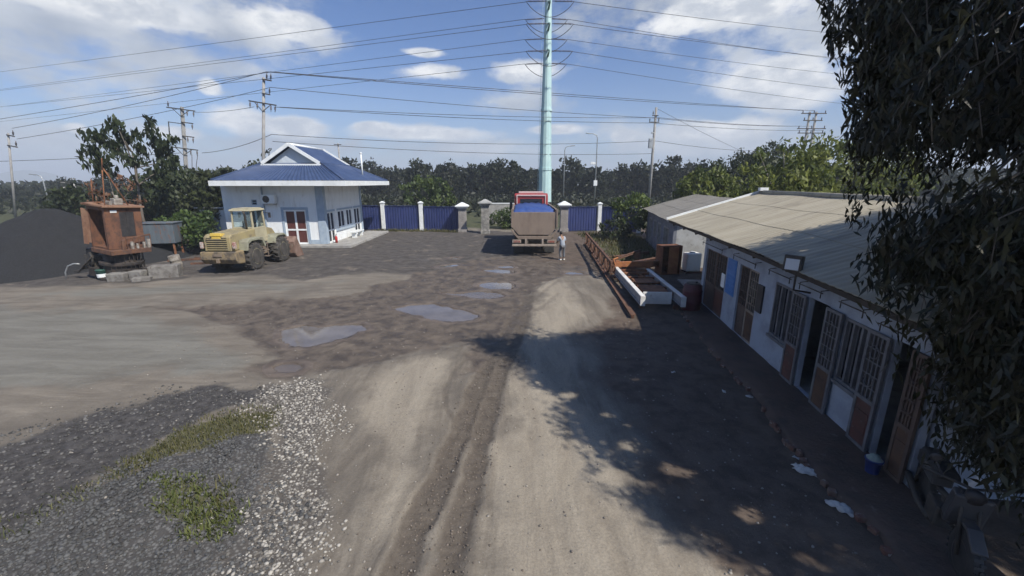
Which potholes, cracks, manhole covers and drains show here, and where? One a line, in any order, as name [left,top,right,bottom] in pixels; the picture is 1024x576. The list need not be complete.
pothole [267,322,376,351]
pothole [262,359,313,377]
pothole [433,290,511,300]
pothole [472,280,521,291]
pothole [387,301,486,324]
